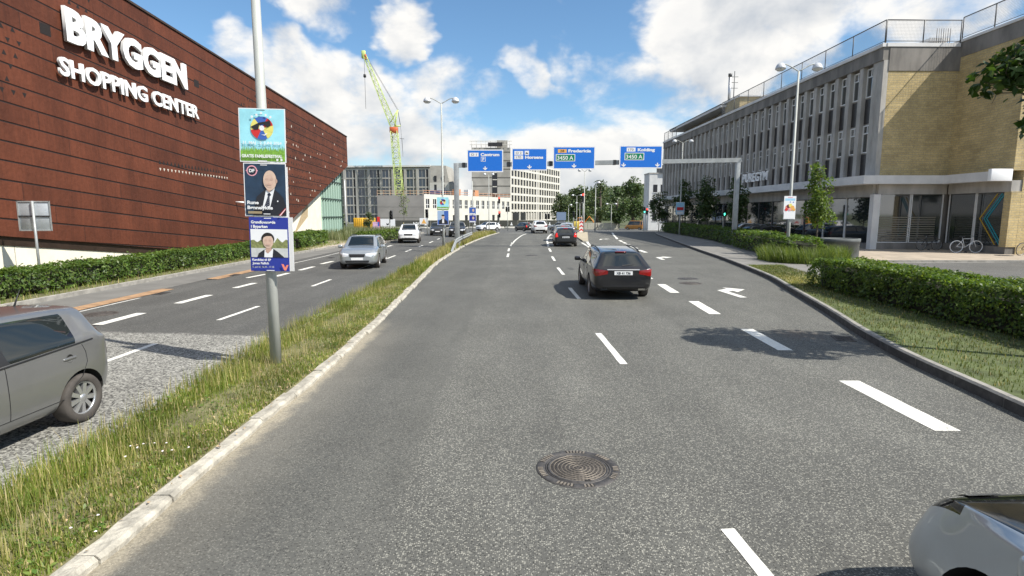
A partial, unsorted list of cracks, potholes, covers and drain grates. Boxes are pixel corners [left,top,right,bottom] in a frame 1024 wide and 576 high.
manhole cover [536,450,620,489]
